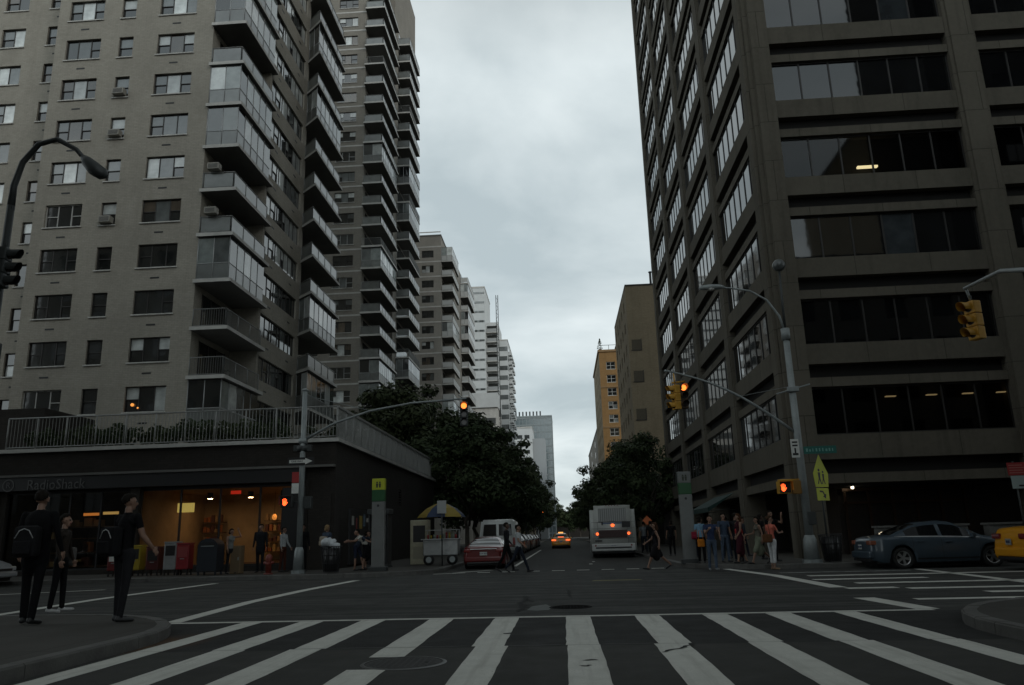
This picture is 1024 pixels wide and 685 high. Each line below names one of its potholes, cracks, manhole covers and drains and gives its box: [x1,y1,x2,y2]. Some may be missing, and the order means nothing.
manhole cover [360,656,447,670]
